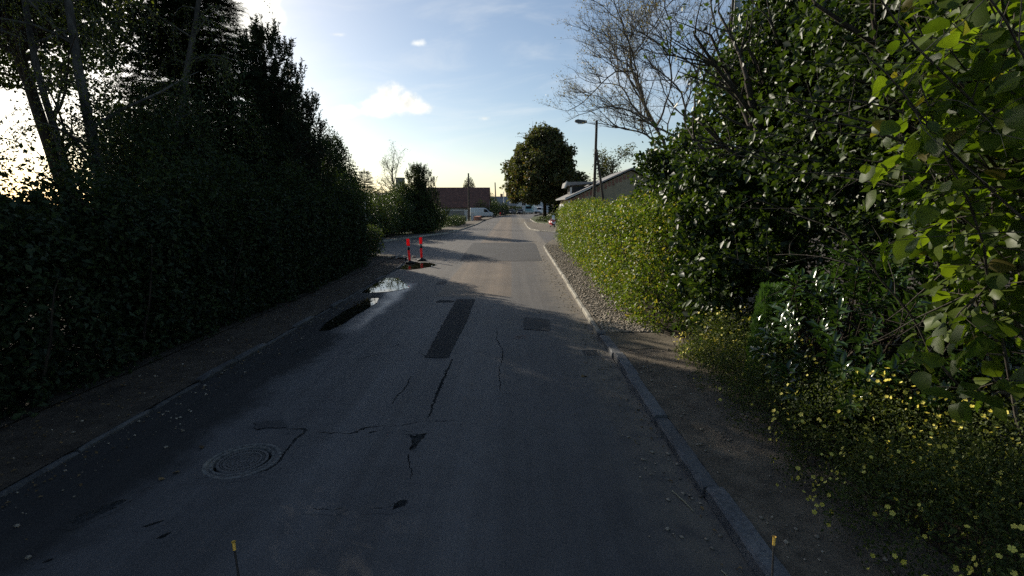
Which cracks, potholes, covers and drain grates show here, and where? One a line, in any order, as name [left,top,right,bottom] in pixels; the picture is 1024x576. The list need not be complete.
pothole [406,431,431,453]
crack [175,343,465,485]
pothole [384,496,415,515]
pothole [146,528,181,545]
pothole [132,517,175,532]
manhole cover [201,443,281,479]
